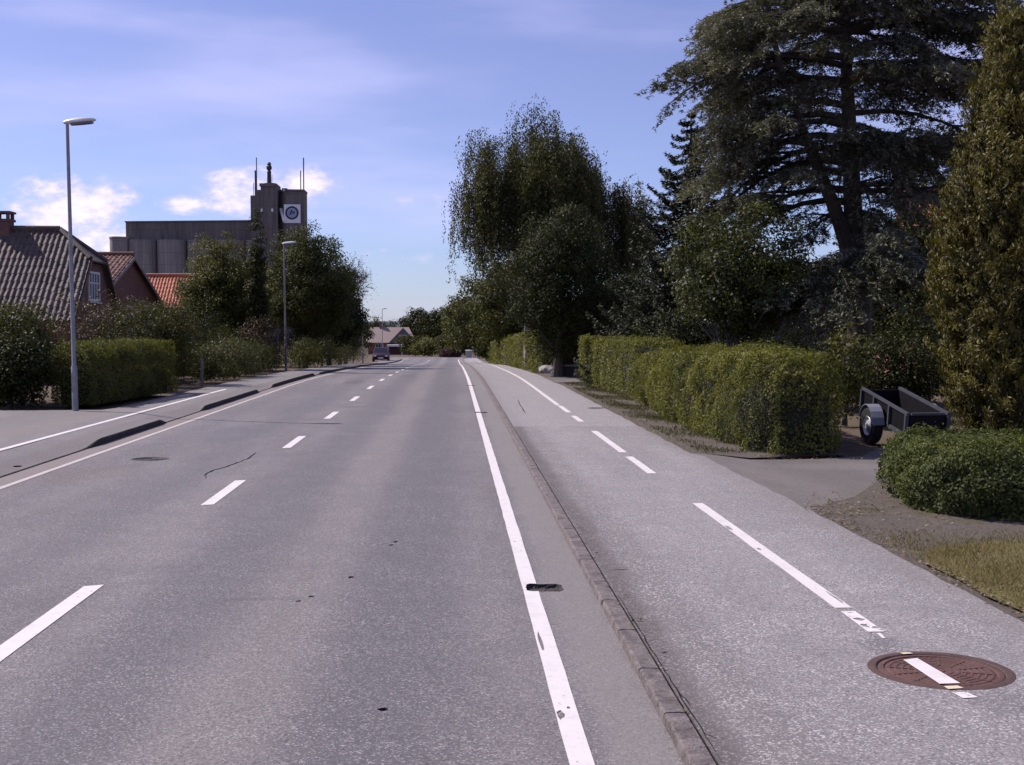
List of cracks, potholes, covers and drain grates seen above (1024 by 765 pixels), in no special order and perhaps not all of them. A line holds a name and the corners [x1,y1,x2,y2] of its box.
pothole [526,584,564,592]
manhole cover [867,651,1016,690]
crack [204,452,256,478]
